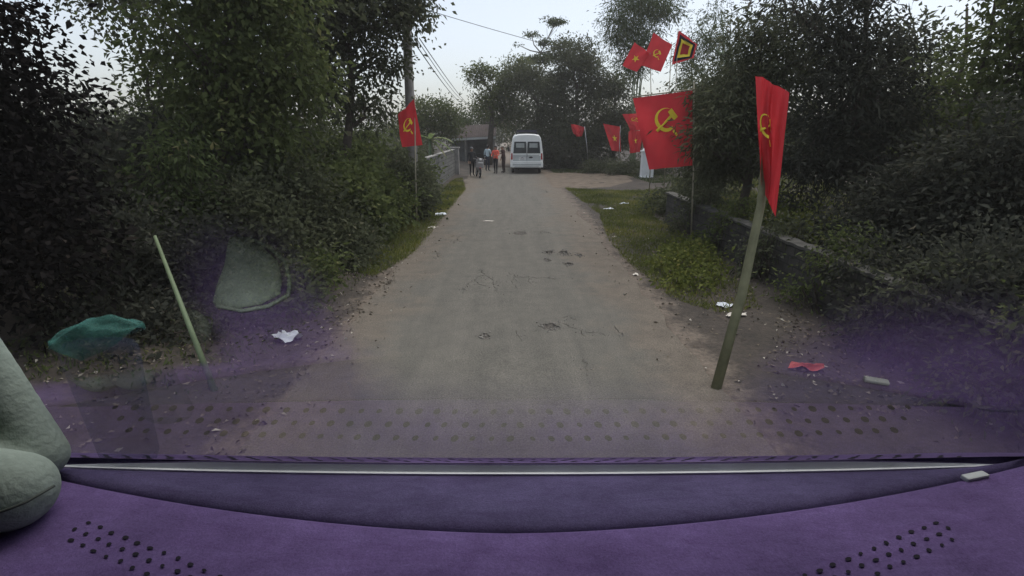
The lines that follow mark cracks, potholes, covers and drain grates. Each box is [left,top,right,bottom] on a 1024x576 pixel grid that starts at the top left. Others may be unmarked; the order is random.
crack [524,314,628,337]
pothole [536,321,562,332]
crack [458,271,584,295]
